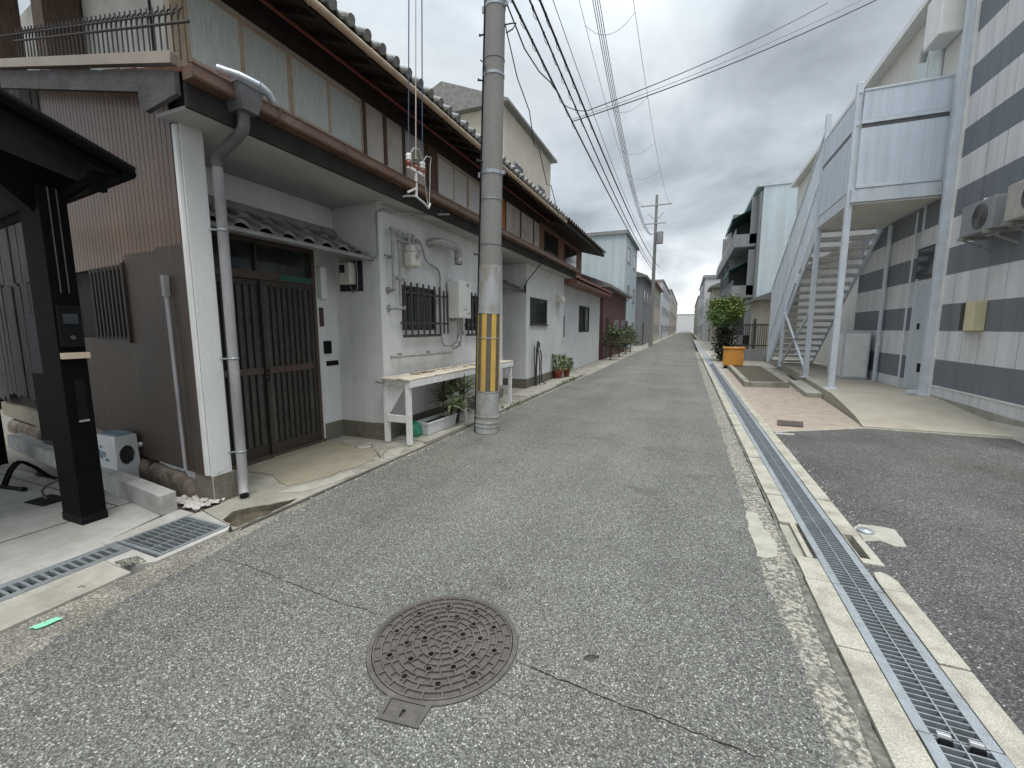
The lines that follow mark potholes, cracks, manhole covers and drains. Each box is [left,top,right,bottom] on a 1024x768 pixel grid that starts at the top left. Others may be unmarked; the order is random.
drain grate [729,401,748,410]
drain grate [0,543,133,602]
drain grate [793,515,884,593]
crack [218,558,381,615]
drain grate [935,730,954,748]
drain grate [771,475,830,520]
drain grate [747,433,780,453]
drain grate [739,419,766,434]
drain grate [118,515,228,558]
drain grate [734,409,756,421]
drain grate [968,739,987,758]
